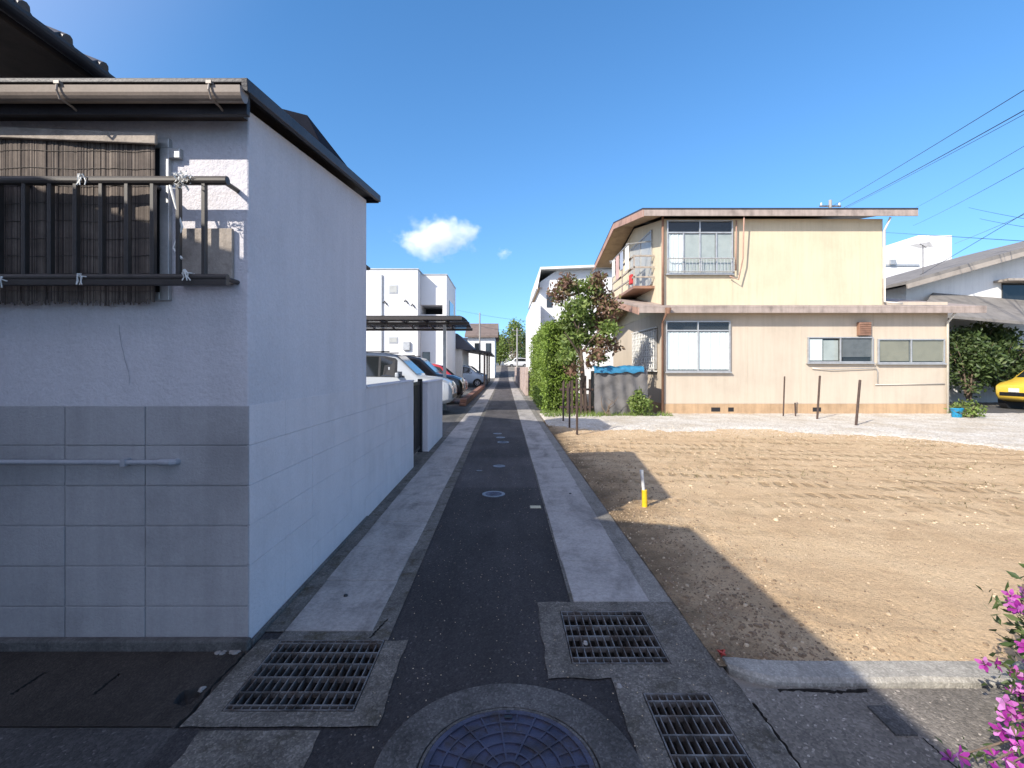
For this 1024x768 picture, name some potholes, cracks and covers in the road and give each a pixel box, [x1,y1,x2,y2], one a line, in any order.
crack [90,674,122,695]
drain grate [221,640,385,712]
manhole cover [374,683,643,768]
drain grate [642,693,756,768]
crack [8,672,48,695]
crack [751,688,873,768]
drain grate [560,611,671,664]
